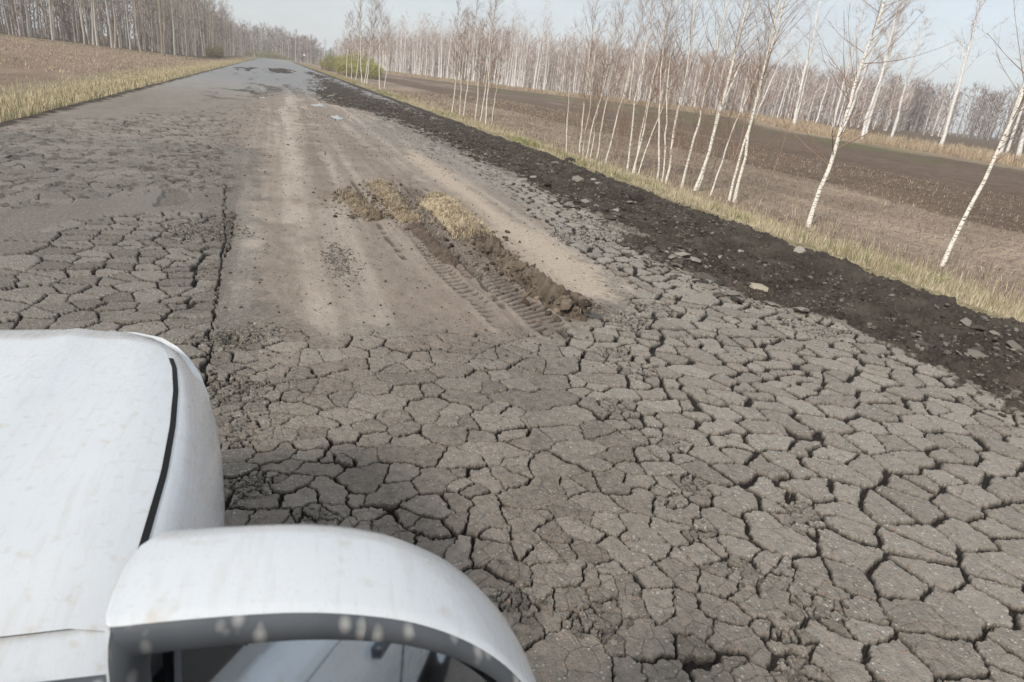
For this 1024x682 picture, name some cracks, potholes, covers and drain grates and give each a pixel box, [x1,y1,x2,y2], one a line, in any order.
crack [220,180,1024,682]
crack [0,220,235,392]
